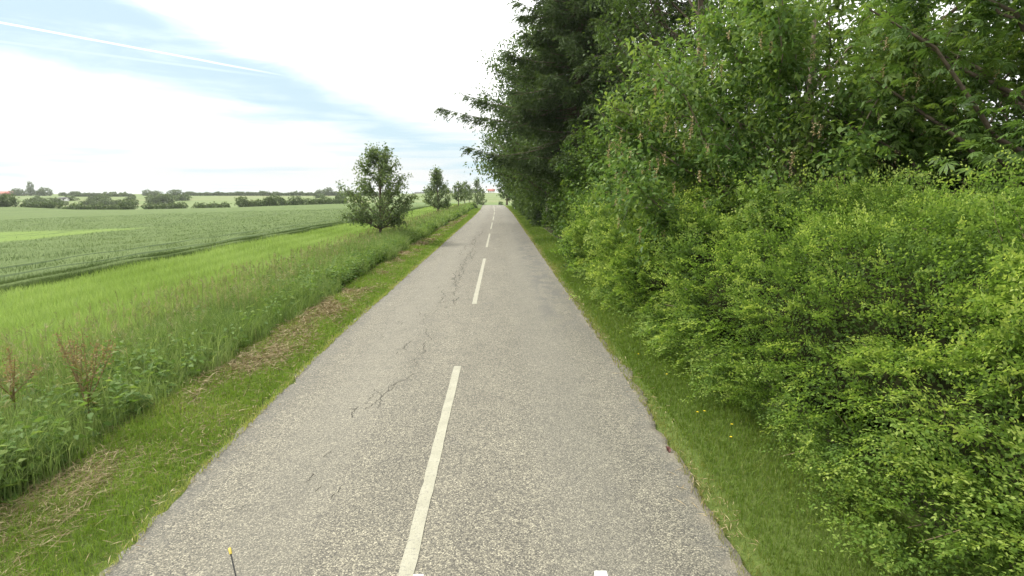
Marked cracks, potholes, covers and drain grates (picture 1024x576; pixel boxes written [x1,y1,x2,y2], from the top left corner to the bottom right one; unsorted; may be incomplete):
crack [351,230,483,417]
